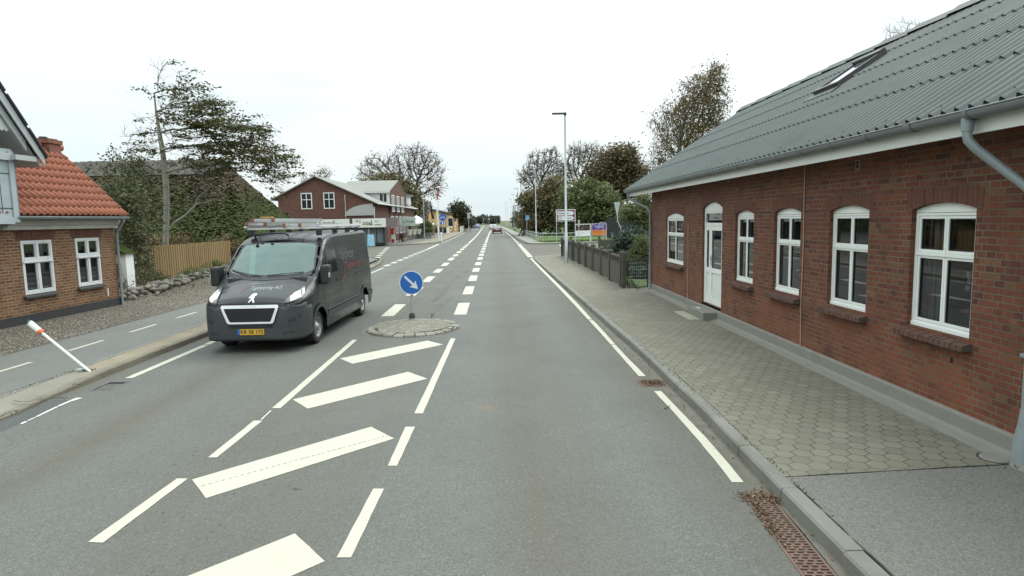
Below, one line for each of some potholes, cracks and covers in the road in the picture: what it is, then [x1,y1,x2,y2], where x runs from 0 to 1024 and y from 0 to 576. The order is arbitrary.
drain grate [742,495,837,576]
drain grate [636,379,666,387]
drain grate [89,381,130,391]
manhole cover [976,452,1010,466]
